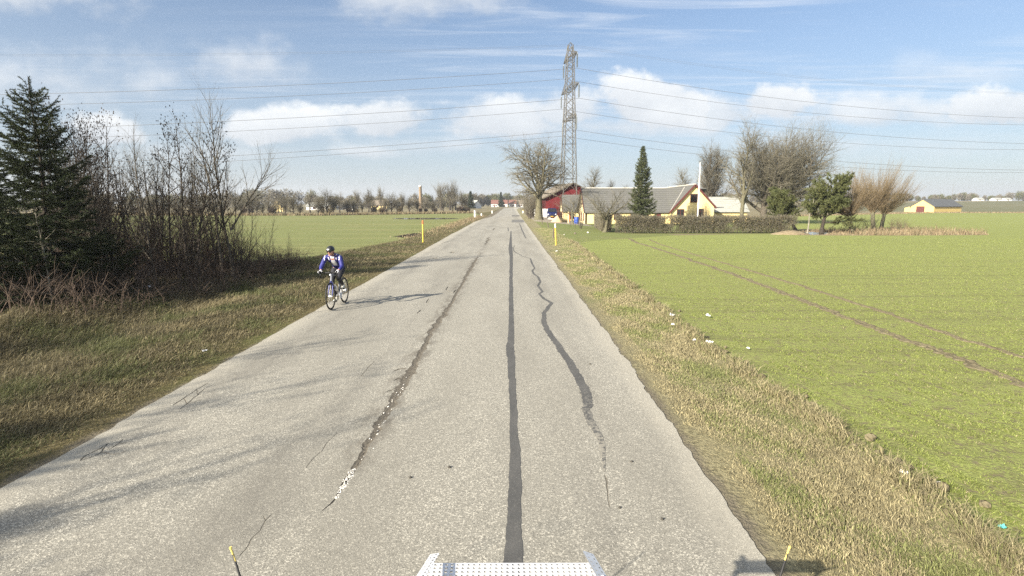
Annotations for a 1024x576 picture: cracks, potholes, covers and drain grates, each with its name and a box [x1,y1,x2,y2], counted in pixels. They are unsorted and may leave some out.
crack [173,383,212,409]
crack [80,439,127,461]
